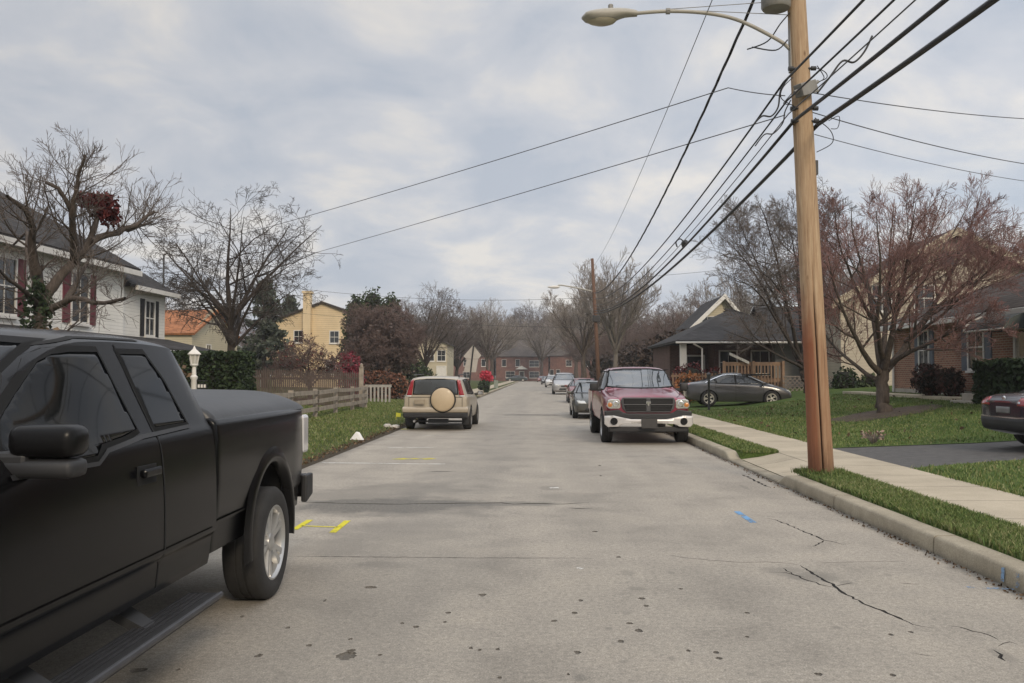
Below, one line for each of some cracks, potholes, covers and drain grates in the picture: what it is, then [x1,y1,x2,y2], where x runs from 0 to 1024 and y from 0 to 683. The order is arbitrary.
crack [947,625,1015,661]
crack [672,519,930,628]
